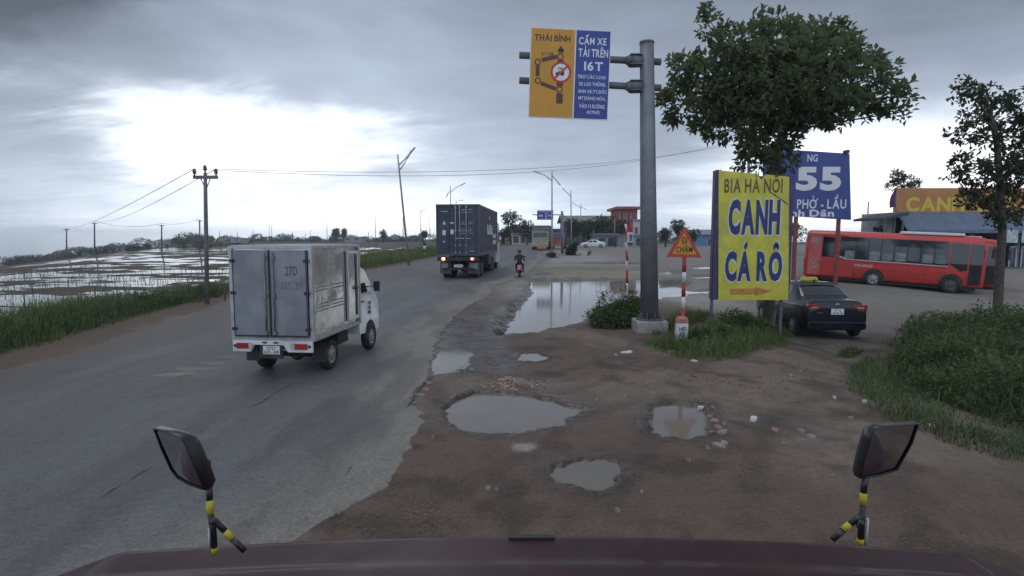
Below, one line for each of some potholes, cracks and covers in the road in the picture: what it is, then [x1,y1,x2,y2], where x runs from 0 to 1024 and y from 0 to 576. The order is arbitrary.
pothole [636,399,722,443]
pothole [433,388,600,439]
pothole [531,452,637,498]
pothole [509,351,560,363]
